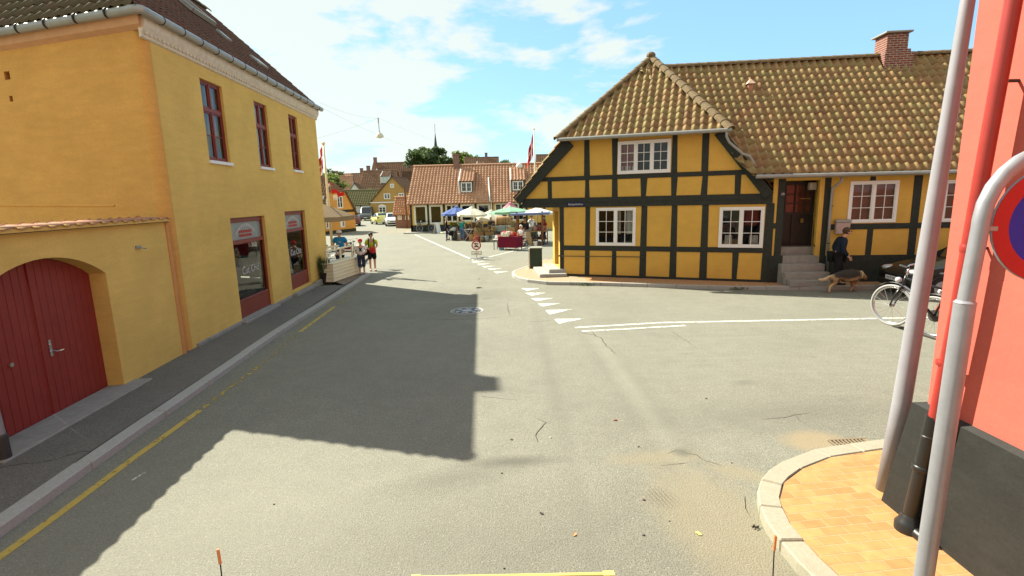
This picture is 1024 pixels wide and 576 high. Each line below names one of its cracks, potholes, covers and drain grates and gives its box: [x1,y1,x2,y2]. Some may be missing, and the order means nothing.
manhole cover [450,307,484,315]
drain grate [827,437,870,446]
